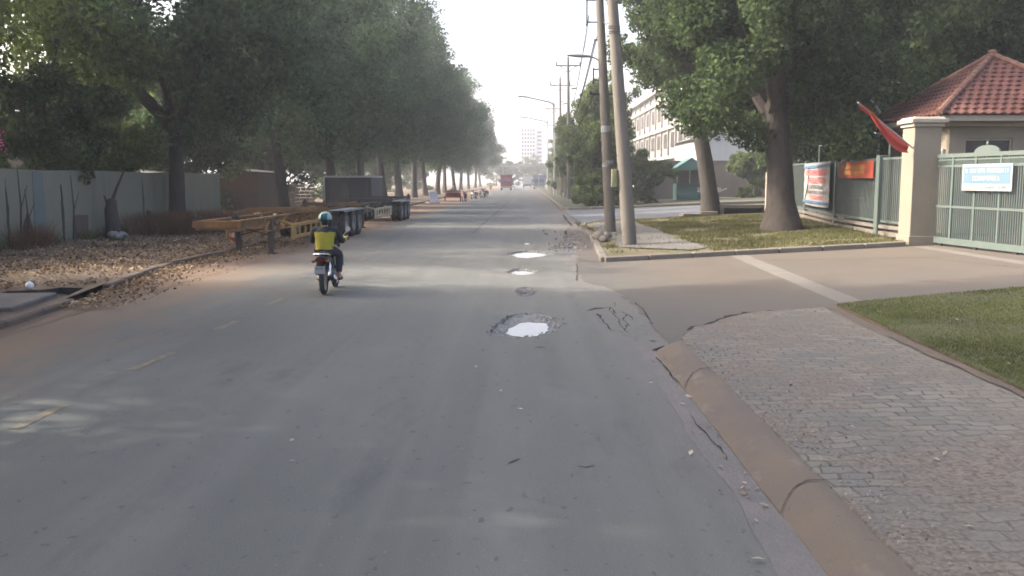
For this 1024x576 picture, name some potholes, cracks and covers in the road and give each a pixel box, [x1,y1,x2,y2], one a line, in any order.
pothole [489,313,562,338]
pothole [515,287,538,297]
crack [587,296,679,388]
